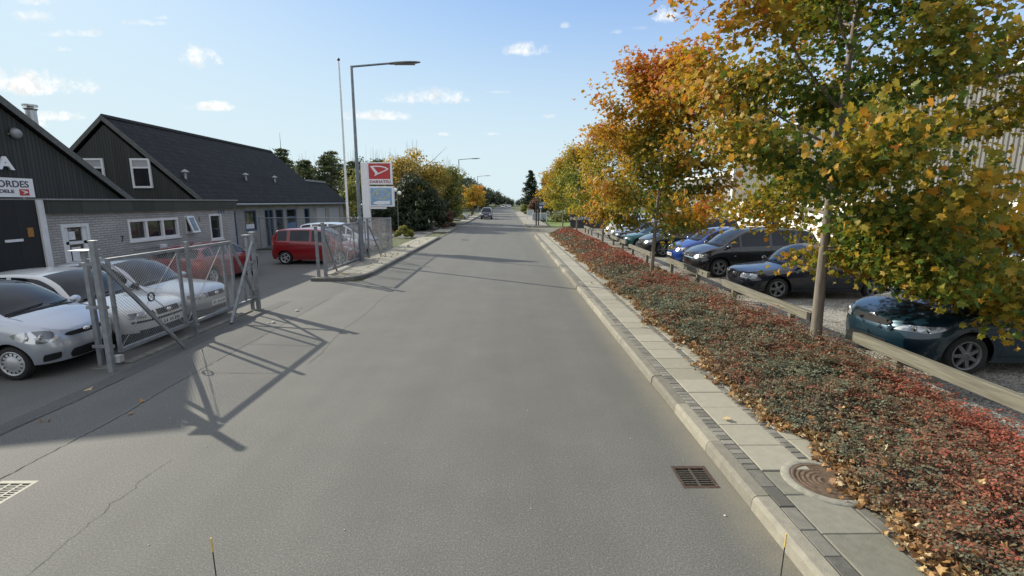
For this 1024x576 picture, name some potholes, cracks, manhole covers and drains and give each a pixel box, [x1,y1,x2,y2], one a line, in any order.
drain grate [670,466,720,488]
drain grate [0,481,38,504]
manhole cover [780,459,873,508]
